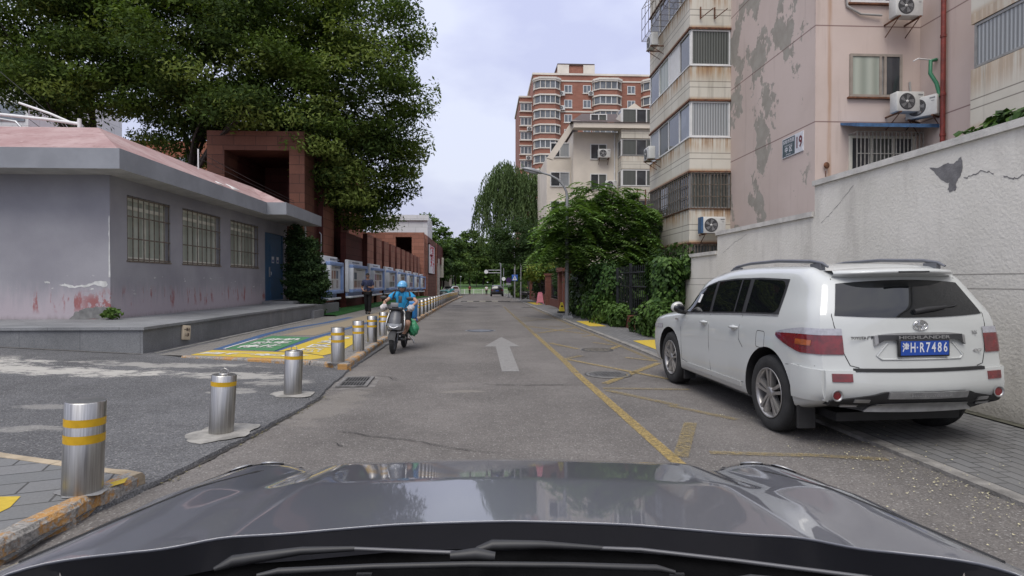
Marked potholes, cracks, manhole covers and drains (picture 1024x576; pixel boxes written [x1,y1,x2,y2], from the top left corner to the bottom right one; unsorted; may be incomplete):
drain grate [328,376,381,390]
crack [334,430,503,453]
